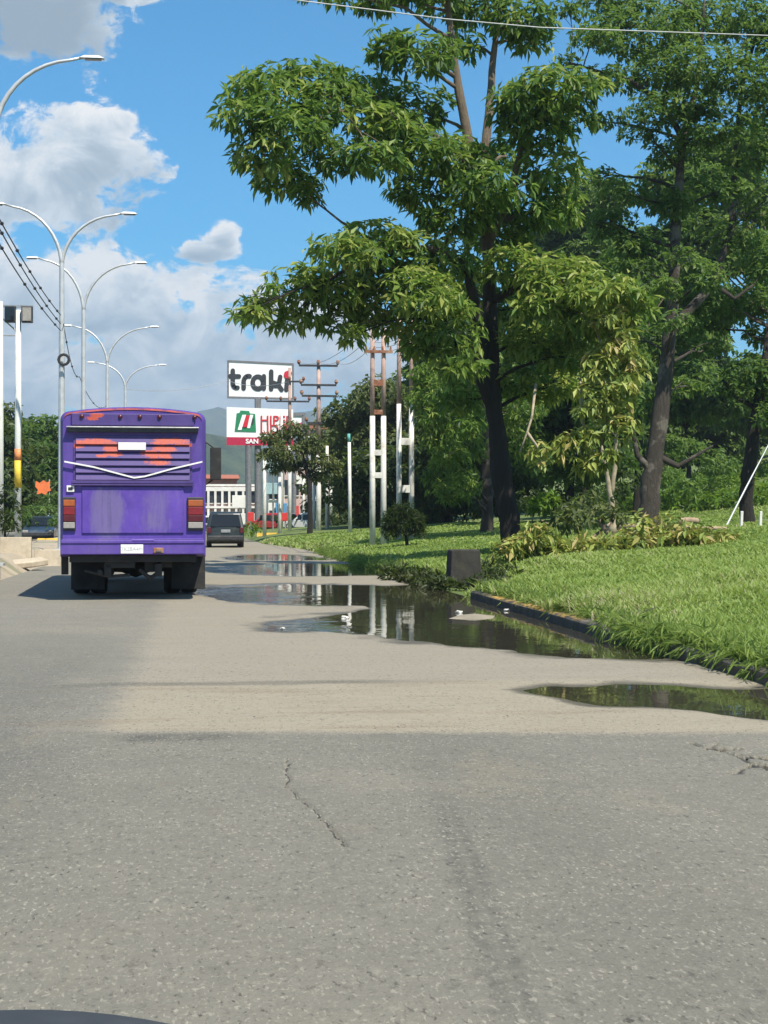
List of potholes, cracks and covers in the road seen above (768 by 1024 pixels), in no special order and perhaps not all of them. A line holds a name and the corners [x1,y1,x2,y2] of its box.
crack [694,745,768,774]
crack [284,761,345,847]
